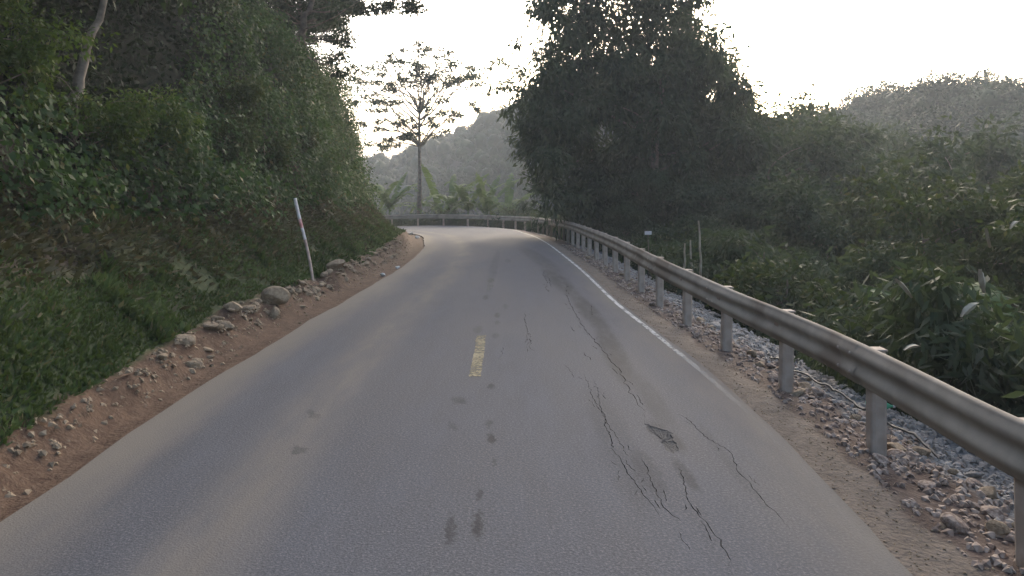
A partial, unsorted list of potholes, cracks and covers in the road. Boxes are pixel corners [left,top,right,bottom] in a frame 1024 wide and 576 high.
crack [568,298,731,562]
pothole [645,424,679,453]
